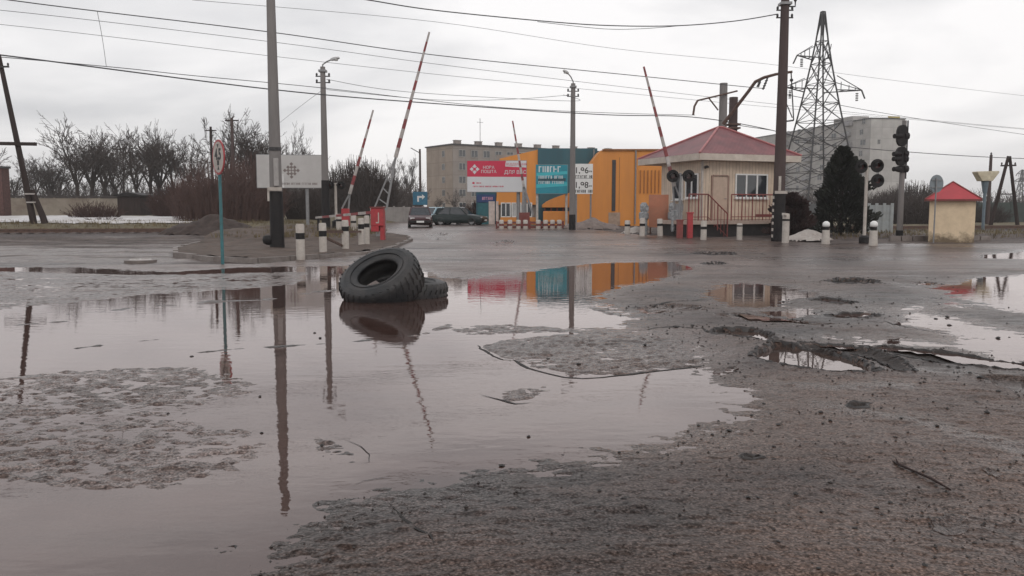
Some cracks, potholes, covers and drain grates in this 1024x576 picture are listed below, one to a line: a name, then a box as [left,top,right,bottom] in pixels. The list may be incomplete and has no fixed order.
pothole [845,399,872,409]
crack [390,504,435,545]
pothole [704,326,779,341]
pothole [748,339,885,372]
